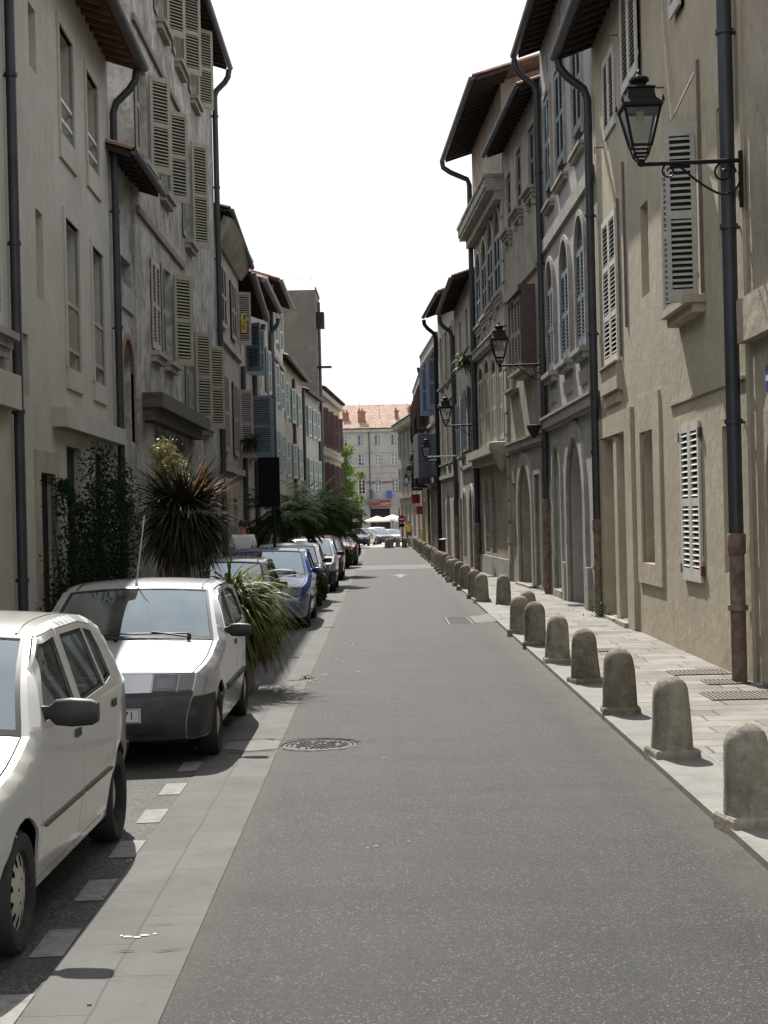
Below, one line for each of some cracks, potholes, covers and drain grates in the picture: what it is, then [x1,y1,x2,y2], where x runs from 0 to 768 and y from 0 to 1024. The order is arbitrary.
drain grate [699,690,768,701]
manhole cover [282,740,358,750]
manhole cover [444,617,474,625]
